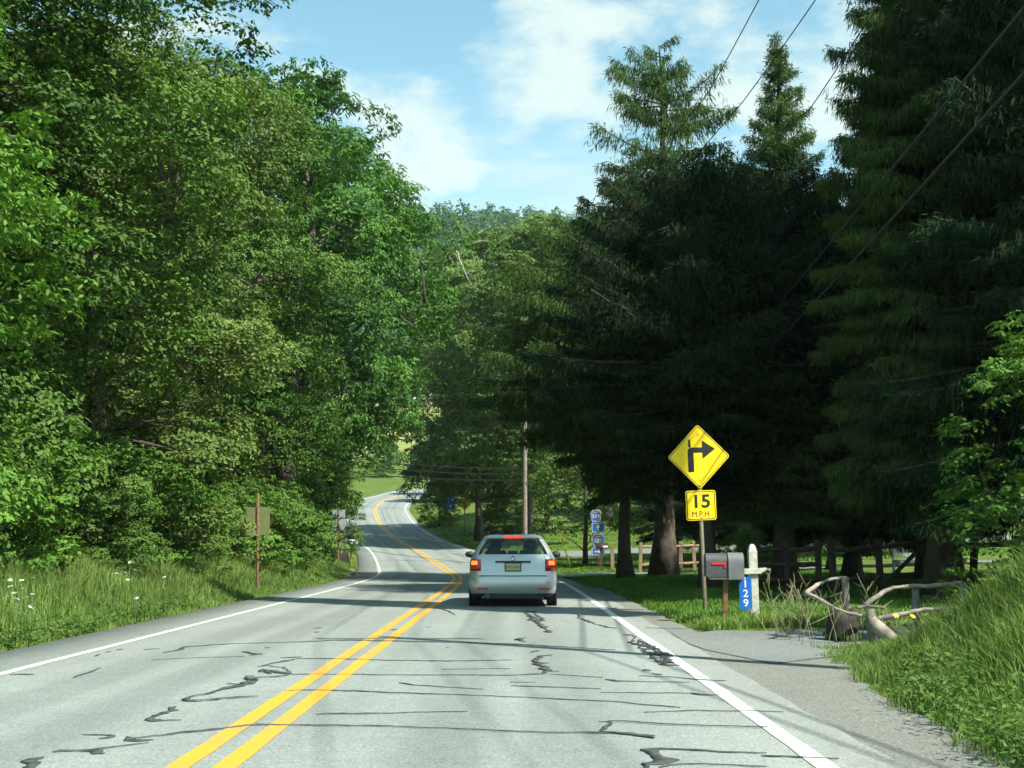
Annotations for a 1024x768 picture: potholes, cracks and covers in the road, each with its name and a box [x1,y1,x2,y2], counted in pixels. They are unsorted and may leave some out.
crack [52,611,839,759]
